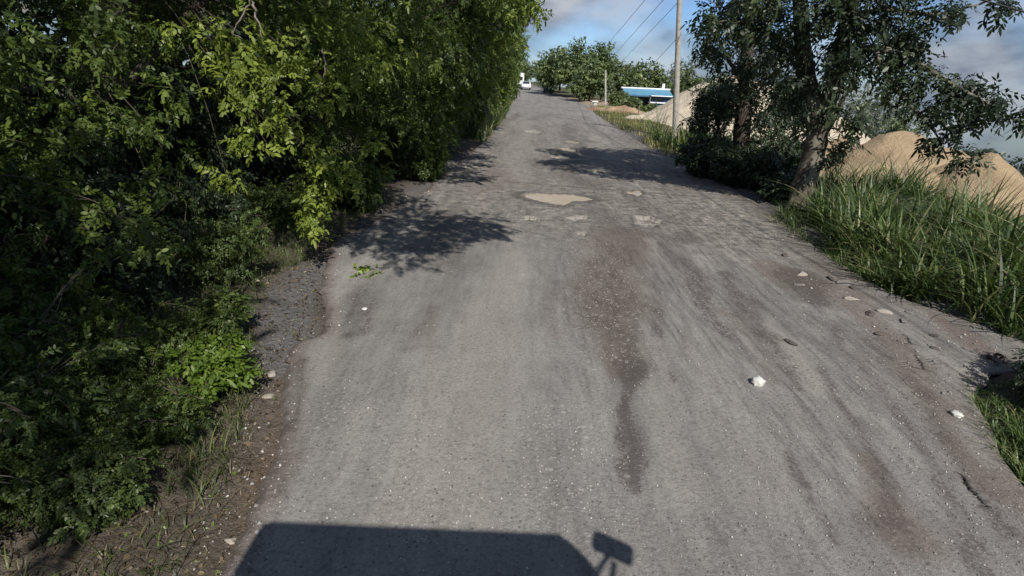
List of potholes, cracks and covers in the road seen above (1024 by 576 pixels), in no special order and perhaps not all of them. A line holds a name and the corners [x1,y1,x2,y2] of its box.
pothole [559,213,598,224]
pothole [627,214,674,230]
crack [943,471,1003,510]
pothole [517,192,600,207]
pothole [619,189,651,198]
crack [894,334,933,371]
pothole [515,214,549,224]
